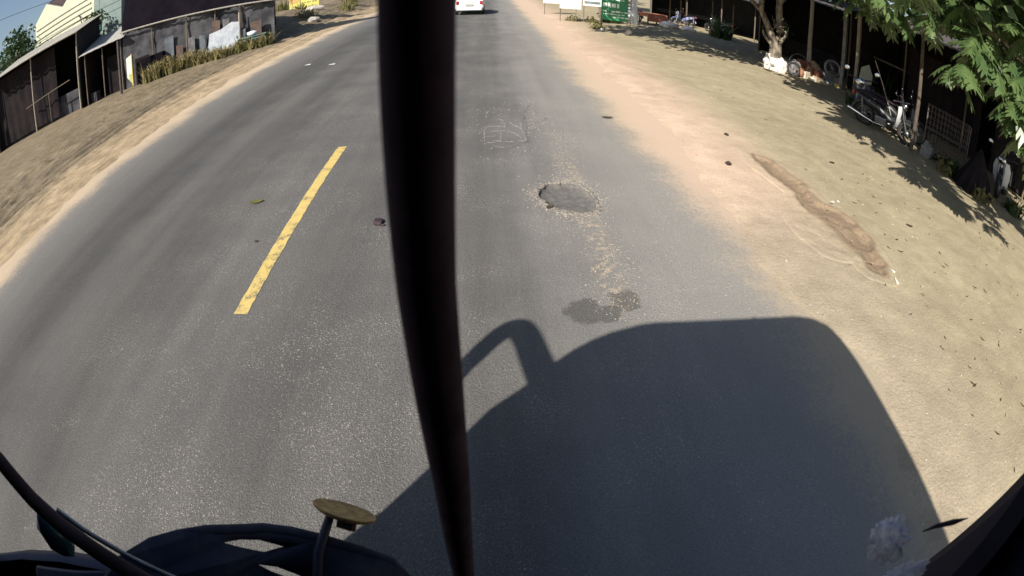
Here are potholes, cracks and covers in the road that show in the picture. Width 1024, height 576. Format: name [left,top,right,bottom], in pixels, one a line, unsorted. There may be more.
pothole [531,182,604,217]
